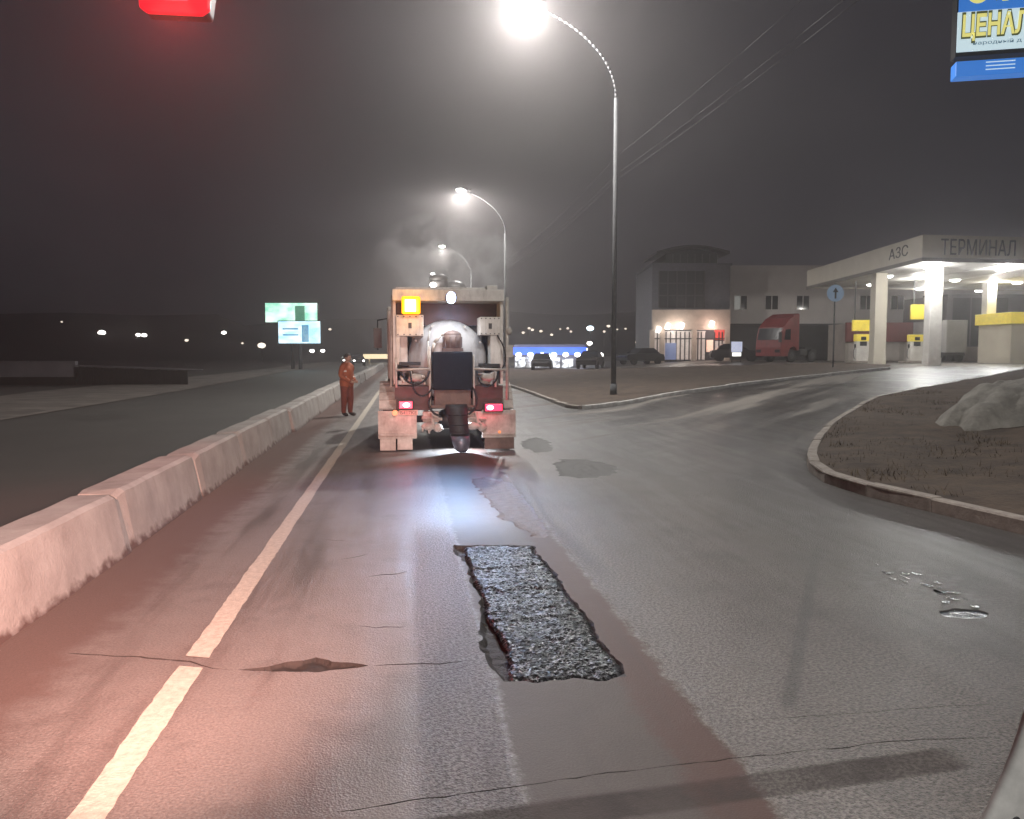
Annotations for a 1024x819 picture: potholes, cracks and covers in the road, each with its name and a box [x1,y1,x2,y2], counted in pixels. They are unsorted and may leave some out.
pothole [939,608,989,619]
pothole [241,657,368,672]
crack [340,737,988,812]
crack [70,653,469,670]
